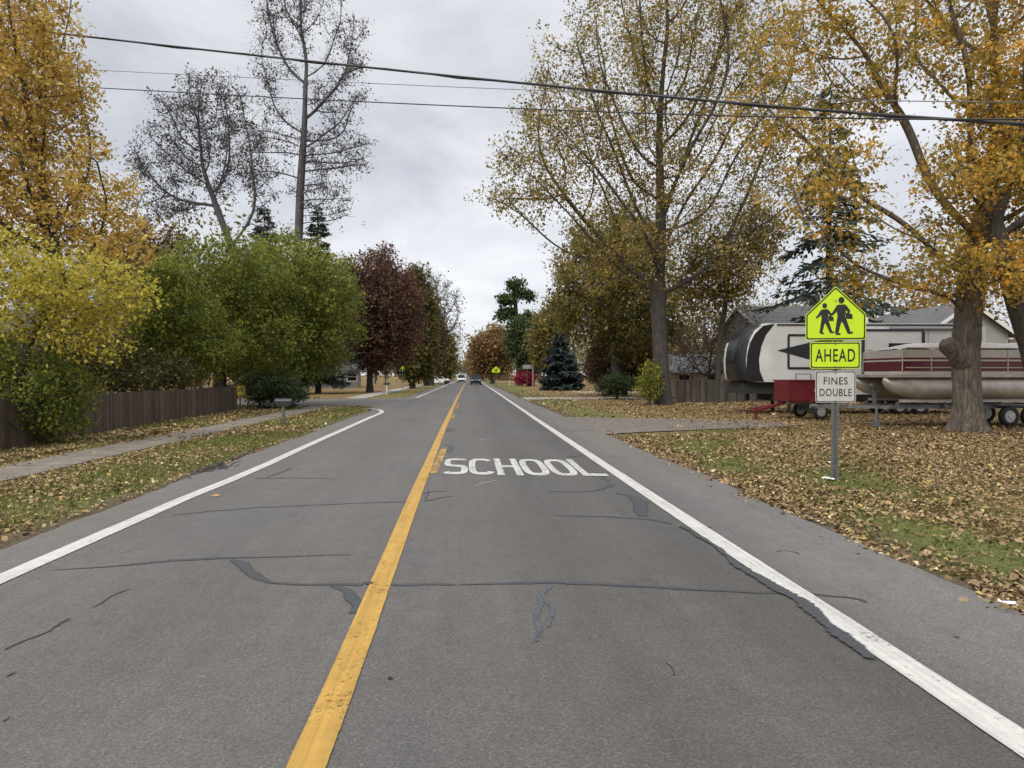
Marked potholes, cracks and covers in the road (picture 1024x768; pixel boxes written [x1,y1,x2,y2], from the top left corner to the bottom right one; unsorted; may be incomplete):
crack [4,618,70,650]
